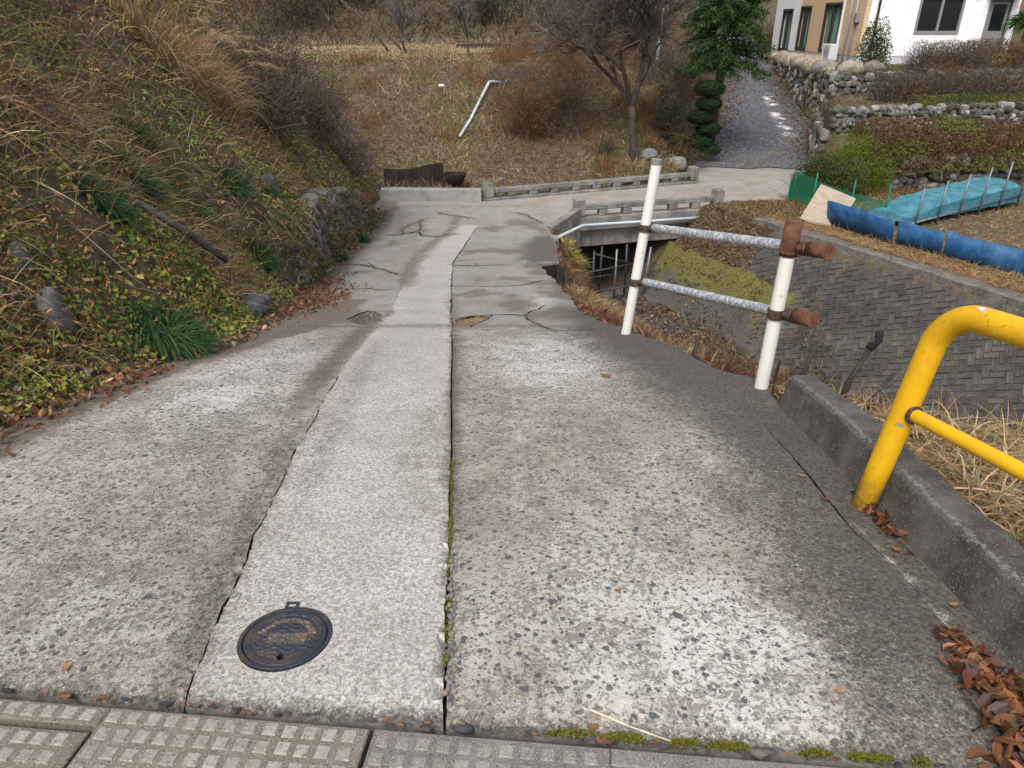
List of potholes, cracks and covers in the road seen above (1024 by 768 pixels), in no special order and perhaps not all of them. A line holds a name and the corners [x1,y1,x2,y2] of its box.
pothole [347,310,383,328]
crack [400,212,549,735]
manhole cover [237,601,333,672]
pothole [455,316,488,326]
